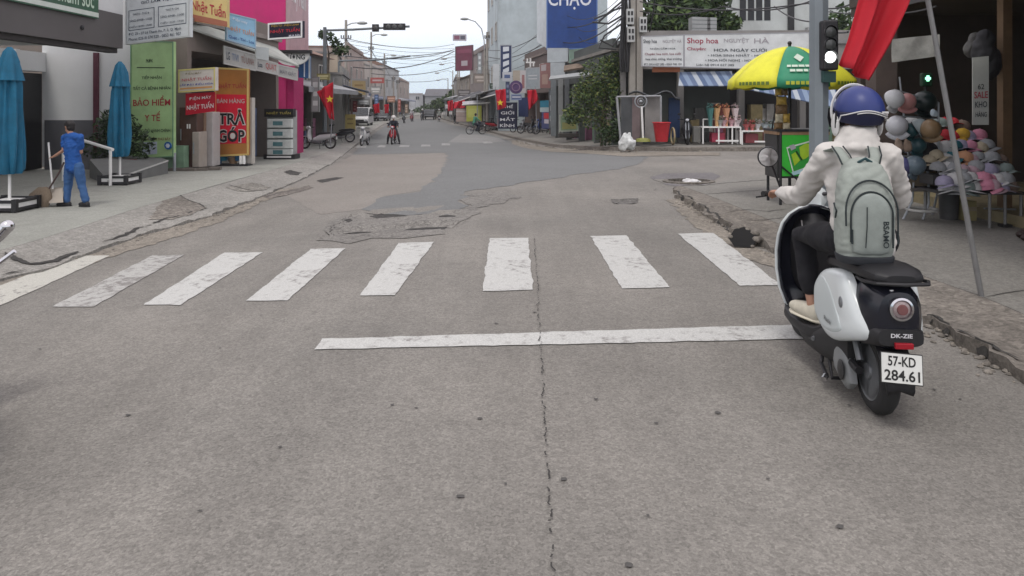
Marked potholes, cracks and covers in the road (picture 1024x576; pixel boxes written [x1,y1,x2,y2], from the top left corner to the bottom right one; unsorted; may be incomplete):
crack [3,251,79,275]
crack [534,238,556,571]
crack [104,195,204,241]
crack [616,173,784,231]
